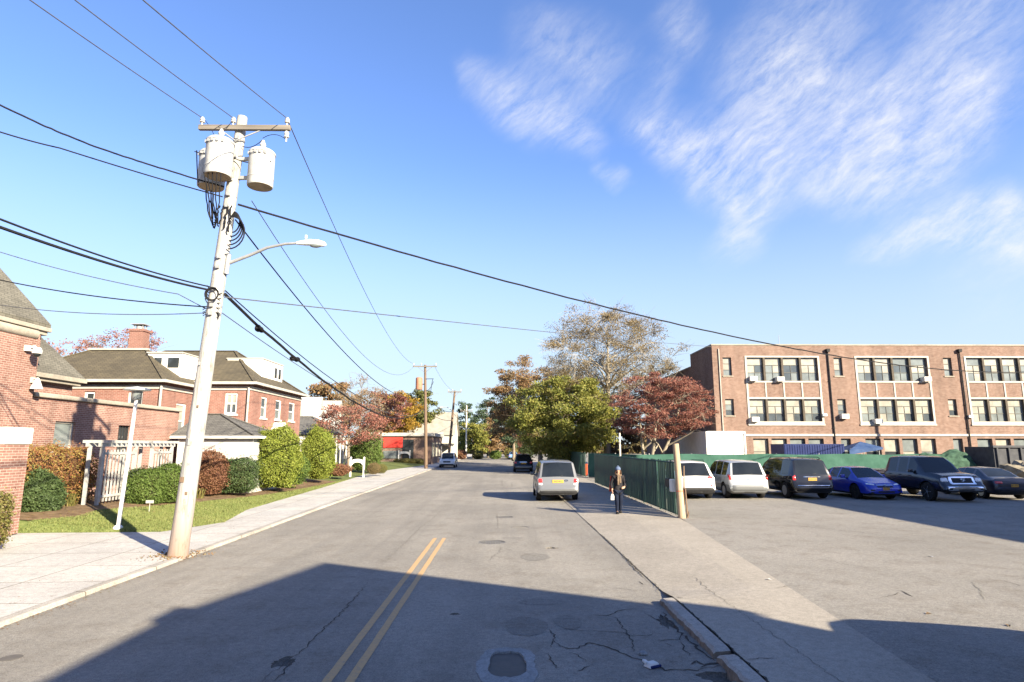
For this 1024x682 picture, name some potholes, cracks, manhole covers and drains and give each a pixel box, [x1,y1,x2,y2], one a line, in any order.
crack [548,593,768,682]
crack [264,582,368,681]
